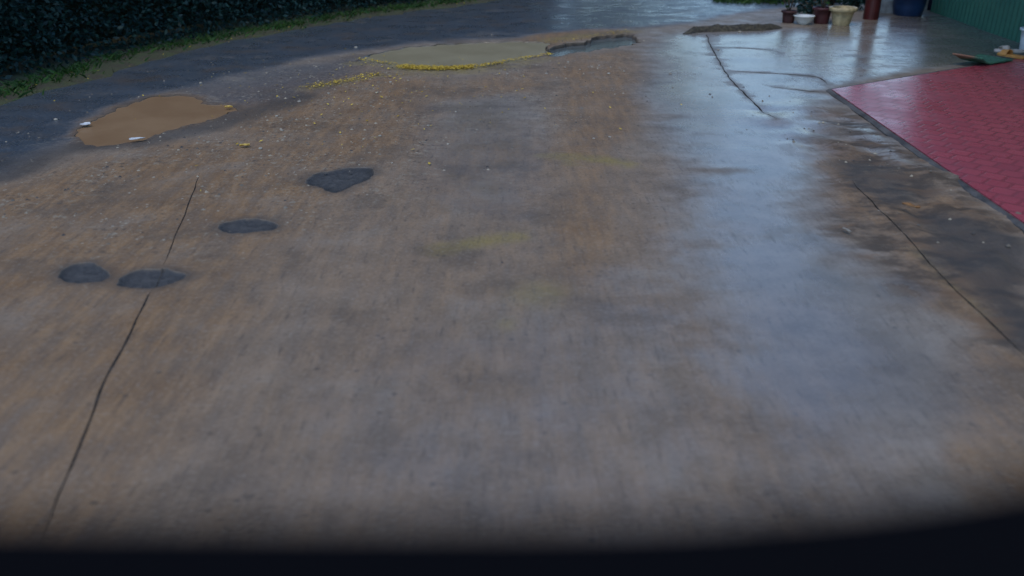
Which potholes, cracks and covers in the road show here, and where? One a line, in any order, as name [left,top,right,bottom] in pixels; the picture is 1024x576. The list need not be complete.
pothole [74,95,238,147]
crack [50,177,199,517]
crack [706,35,825,119]
pothole [545,34,642,57]
crack [853,182,1024,355]
